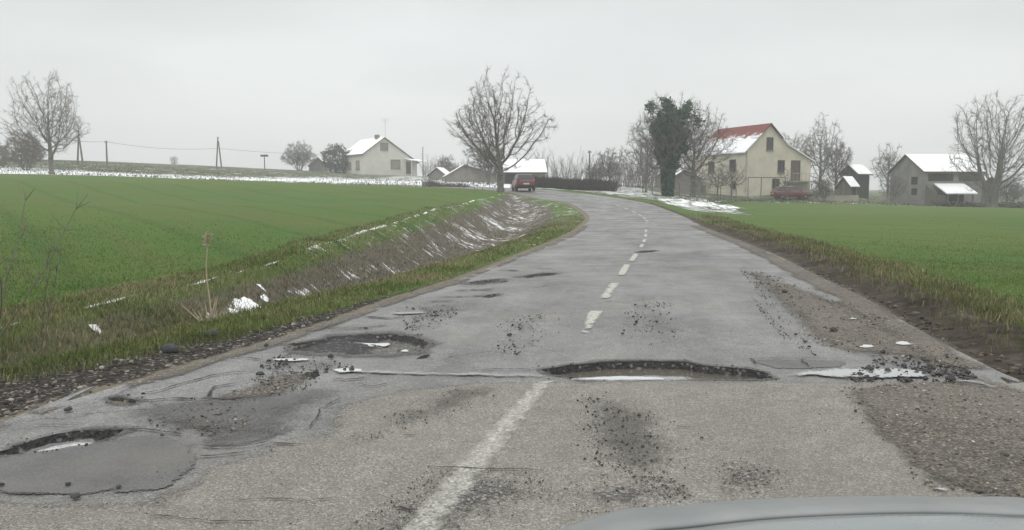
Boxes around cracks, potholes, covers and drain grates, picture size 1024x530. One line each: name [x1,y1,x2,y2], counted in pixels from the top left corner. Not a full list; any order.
pothole [542,361,773,379]
crack [201,397,342,456]
pothole [290,334,428,355]
pothole [0,430,123,455]
